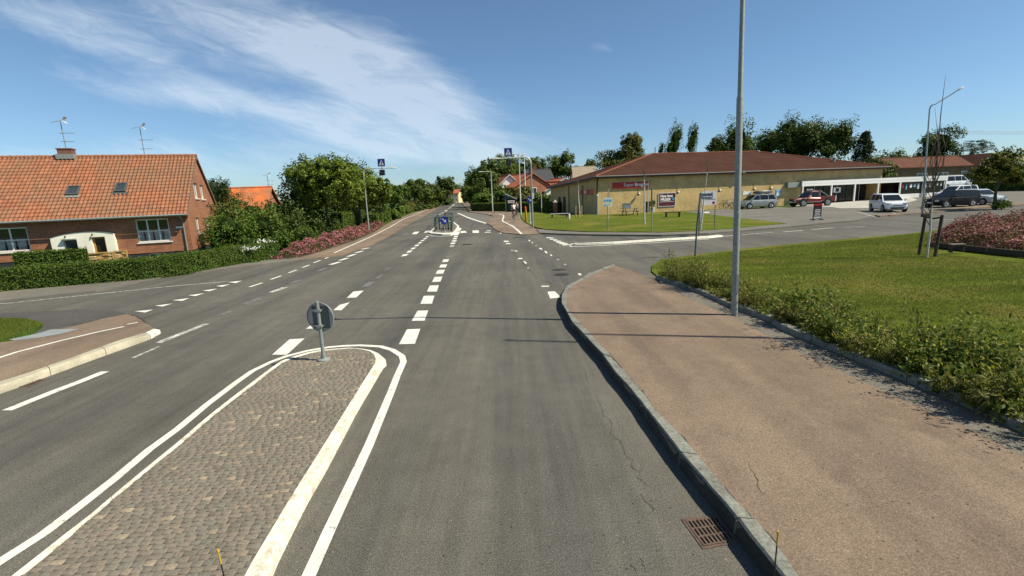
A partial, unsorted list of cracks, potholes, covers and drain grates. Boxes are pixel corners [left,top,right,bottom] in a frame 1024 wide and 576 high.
crack [586,376,656,513]
drain grate [681,515,740,550]
